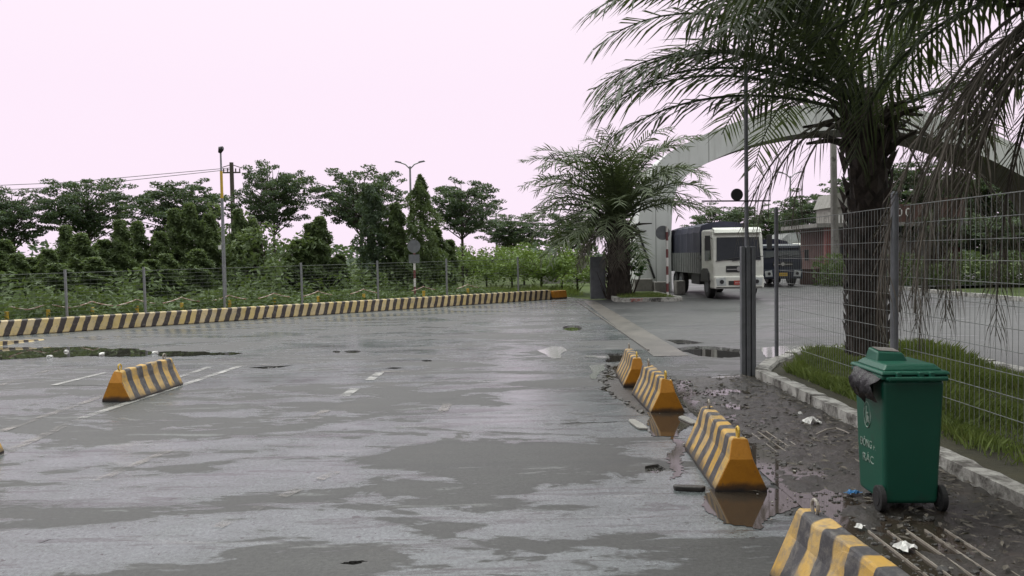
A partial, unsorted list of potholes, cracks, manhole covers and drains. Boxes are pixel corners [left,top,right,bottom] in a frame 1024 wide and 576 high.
pothole [677,346,740,358]
pothole [645,464,665,474]
drain grate [868,529,1020,576]
pothole [597,363,688,415]
